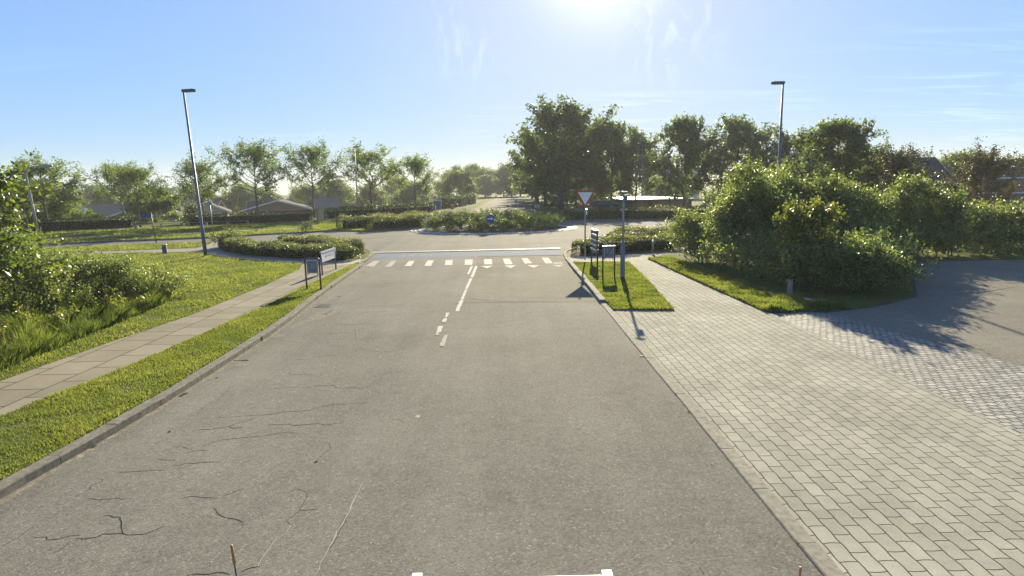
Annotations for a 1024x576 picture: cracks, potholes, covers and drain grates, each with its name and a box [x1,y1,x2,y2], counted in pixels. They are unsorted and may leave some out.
crack [190,481,364,575]
crack [121,359,376,473]
crack [3,479,164,552]
